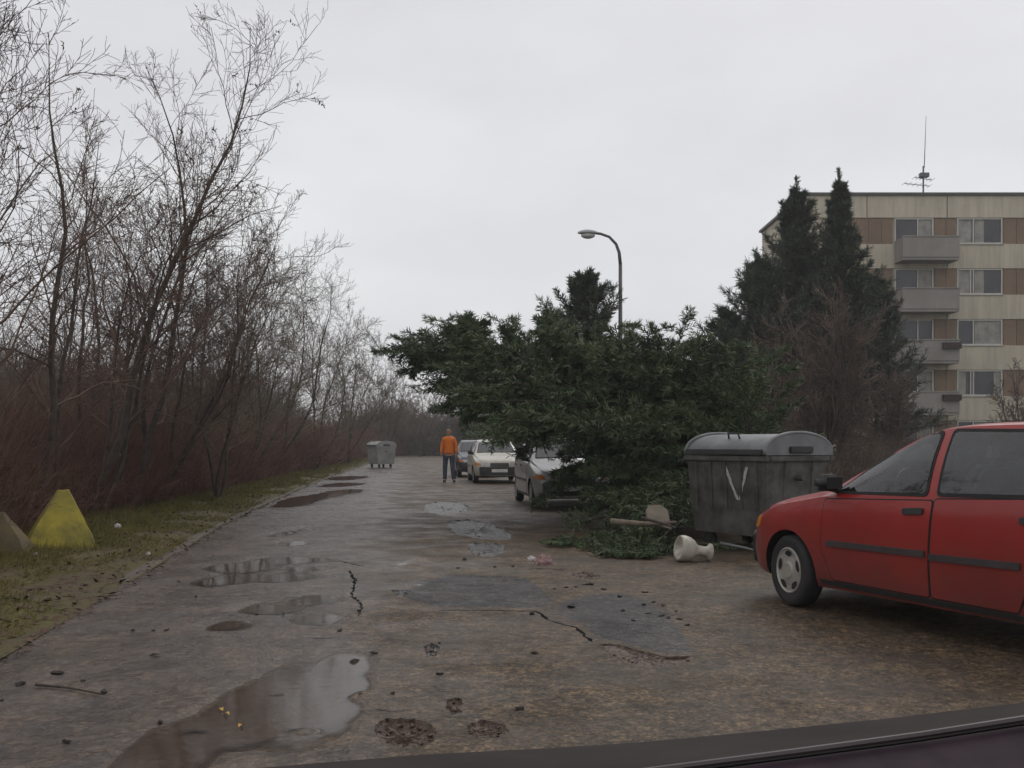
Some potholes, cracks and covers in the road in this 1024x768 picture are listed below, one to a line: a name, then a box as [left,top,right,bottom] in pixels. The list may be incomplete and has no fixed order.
pothole [374,718,437,747]
crack [324,561,363,616]
crack [446,609,593,642]
pothole [424,643,440,657]
pothole [466,719,509,738]
pothole [445,698,463,714]
